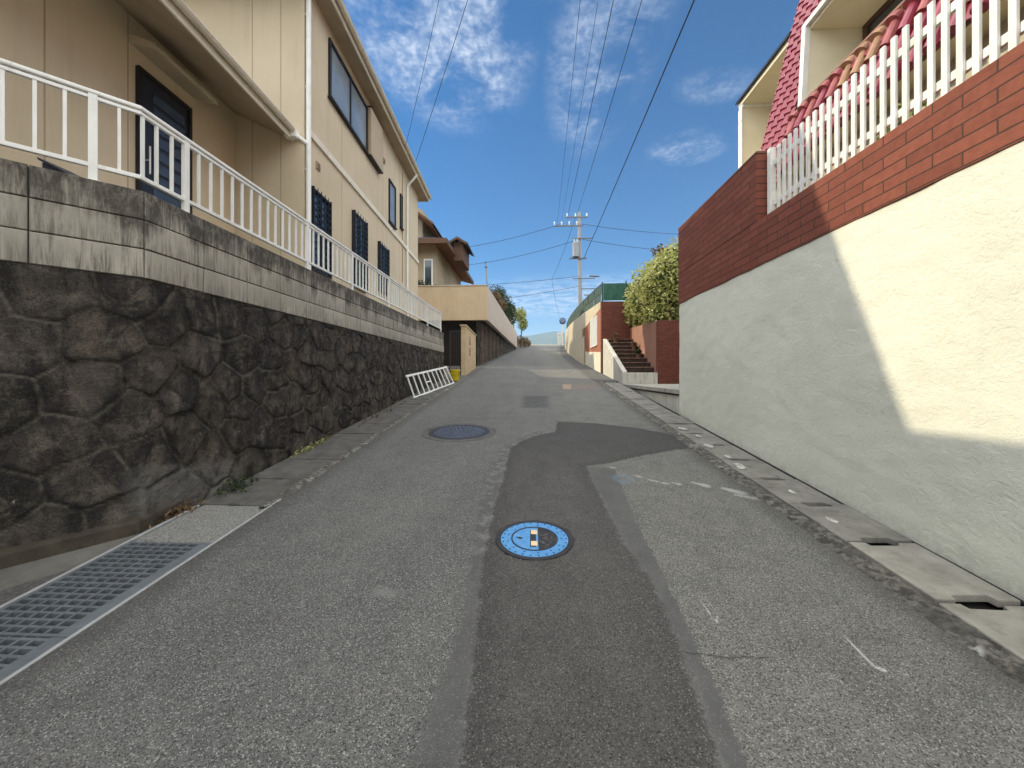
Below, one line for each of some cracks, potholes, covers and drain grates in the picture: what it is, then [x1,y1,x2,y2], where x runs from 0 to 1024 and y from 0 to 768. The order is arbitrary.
manhole cover [421,423,496,442]
manhole cover [496,520,573,561]
drain grate [0,541,211,638]
